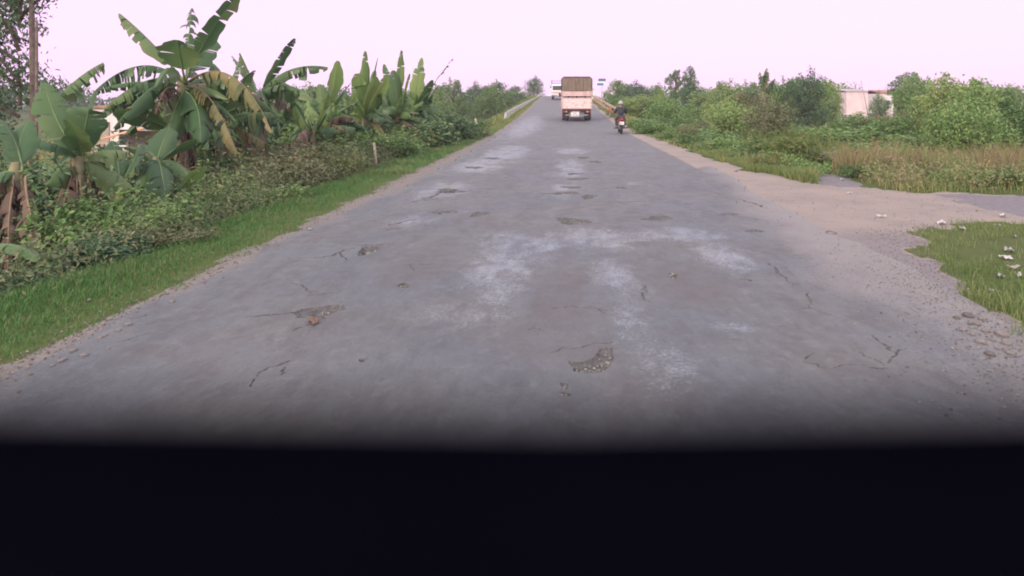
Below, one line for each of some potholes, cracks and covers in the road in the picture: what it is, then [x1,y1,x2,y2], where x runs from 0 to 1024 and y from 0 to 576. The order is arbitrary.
pothole [357,246,381,256]
pothole [248,304,346,331]
pothole [556,217,591,225]
crack [803,335,907,369]
crack [249,359,294,387]
pothole [568,347,614,373]
crack [315,189,458,260]
crack [528,327,613,353]
crack [738,262,836,316]
